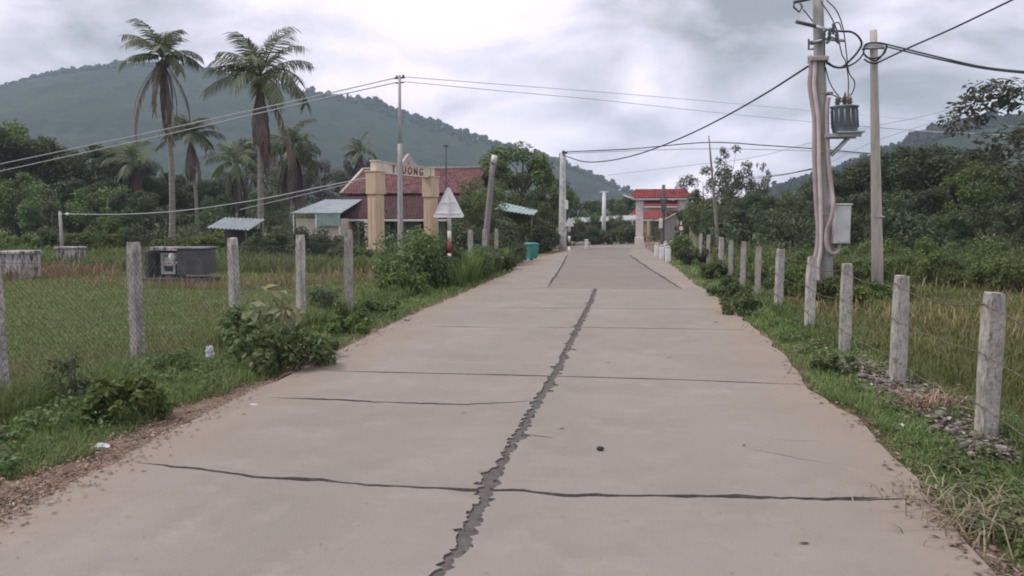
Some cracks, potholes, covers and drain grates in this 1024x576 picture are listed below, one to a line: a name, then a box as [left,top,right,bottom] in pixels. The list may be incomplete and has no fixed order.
crack [141,256,921,576]
